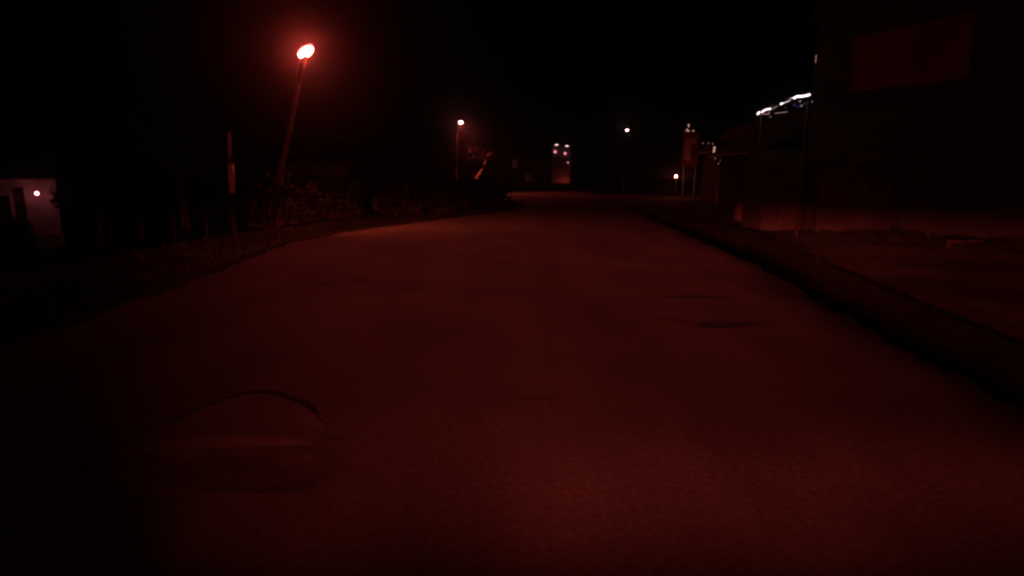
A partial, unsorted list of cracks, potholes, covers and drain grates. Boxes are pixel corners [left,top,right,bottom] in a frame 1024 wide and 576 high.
pothole [678,318,775,330]
